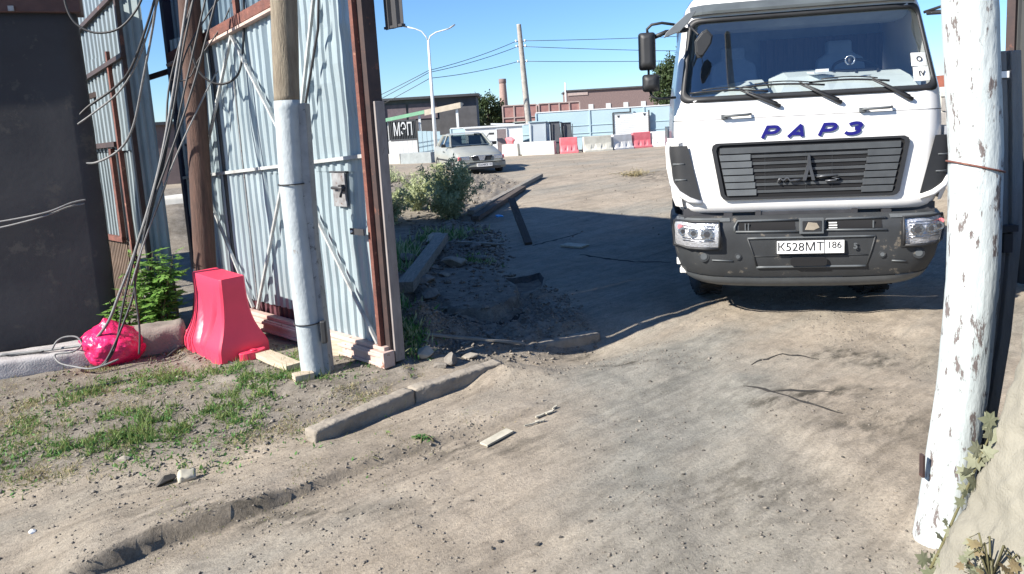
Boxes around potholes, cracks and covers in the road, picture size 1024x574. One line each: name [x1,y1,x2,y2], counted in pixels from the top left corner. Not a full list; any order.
crack [746,386,843,414]
crack [751,353,819,365]
crack [532,233,661,263]
